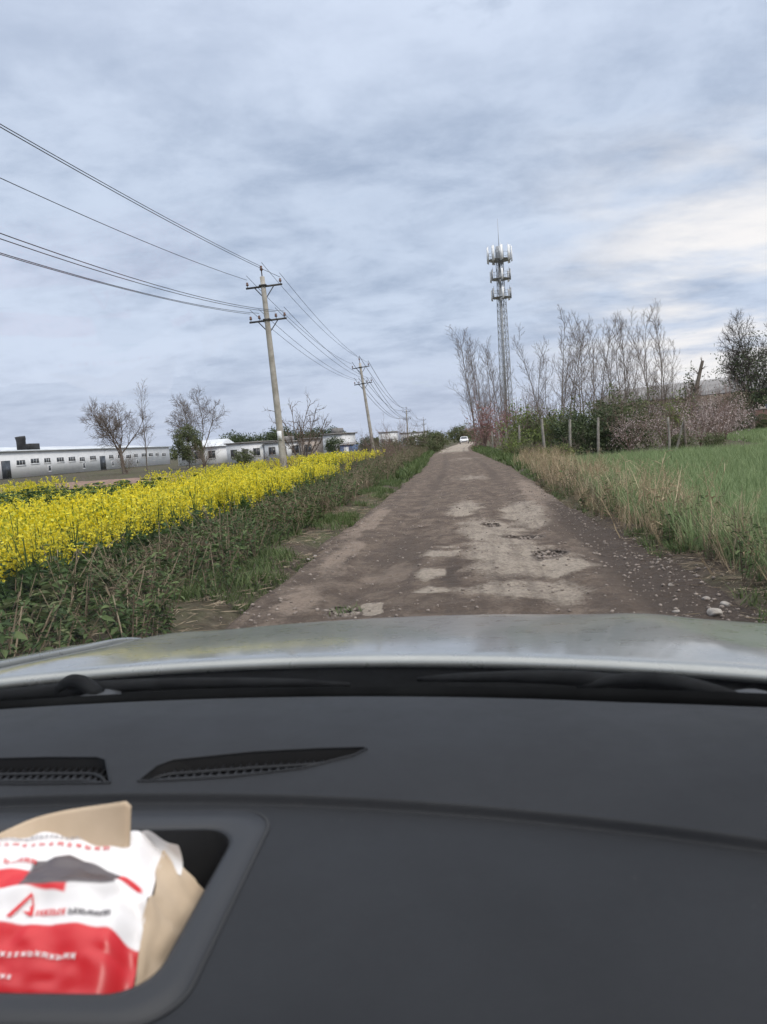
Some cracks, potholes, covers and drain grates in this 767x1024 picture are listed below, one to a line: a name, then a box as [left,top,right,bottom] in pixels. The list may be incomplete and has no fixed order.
pothole [530,548,571,561]
